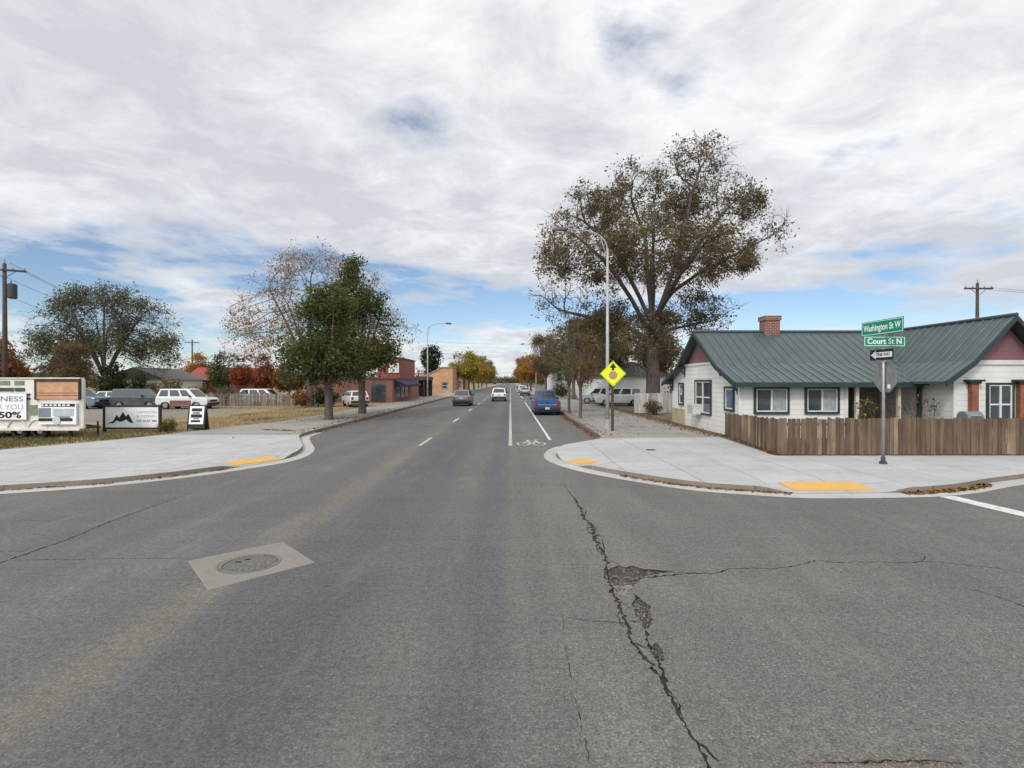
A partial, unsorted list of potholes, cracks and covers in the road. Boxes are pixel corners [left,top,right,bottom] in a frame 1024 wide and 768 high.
crack [564,485,1024,768]
manhole cover [188,542,315,590]
